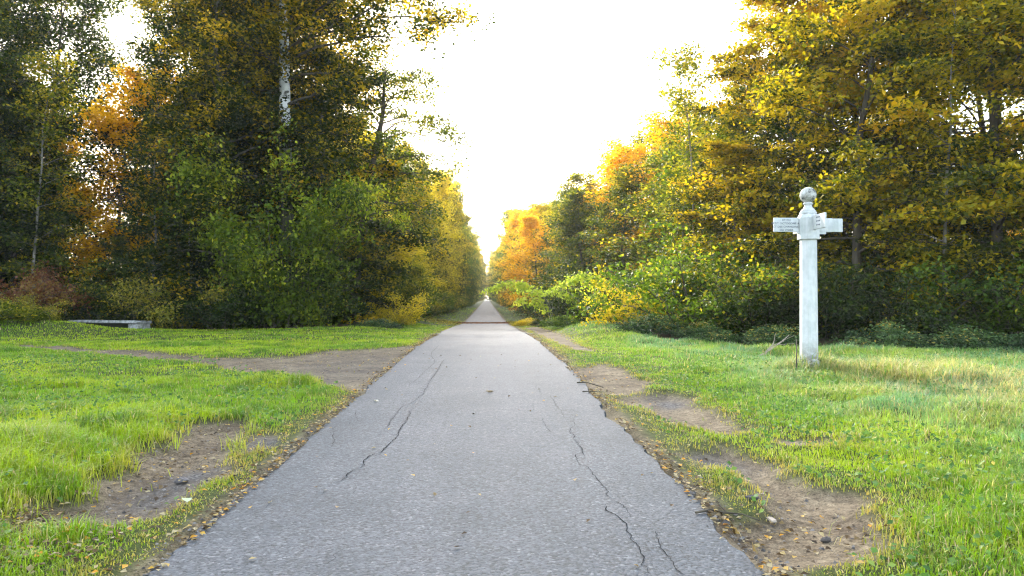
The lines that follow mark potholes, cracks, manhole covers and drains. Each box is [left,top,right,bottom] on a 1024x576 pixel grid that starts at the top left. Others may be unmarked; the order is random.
crack [341,357,441,492]
crack [555,404,683,574]
